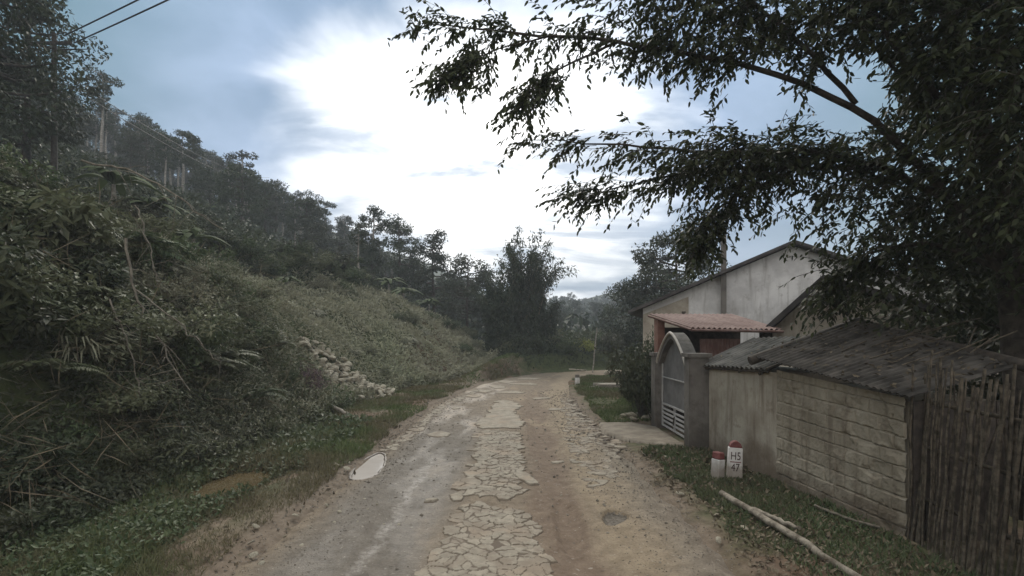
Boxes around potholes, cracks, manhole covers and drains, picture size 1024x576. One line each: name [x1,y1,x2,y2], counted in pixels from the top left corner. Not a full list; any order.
pothole [598,509,631,527]
crack [379,389,558,576]
pothole [348,452,387,480]
crack [558,395,628,488]
